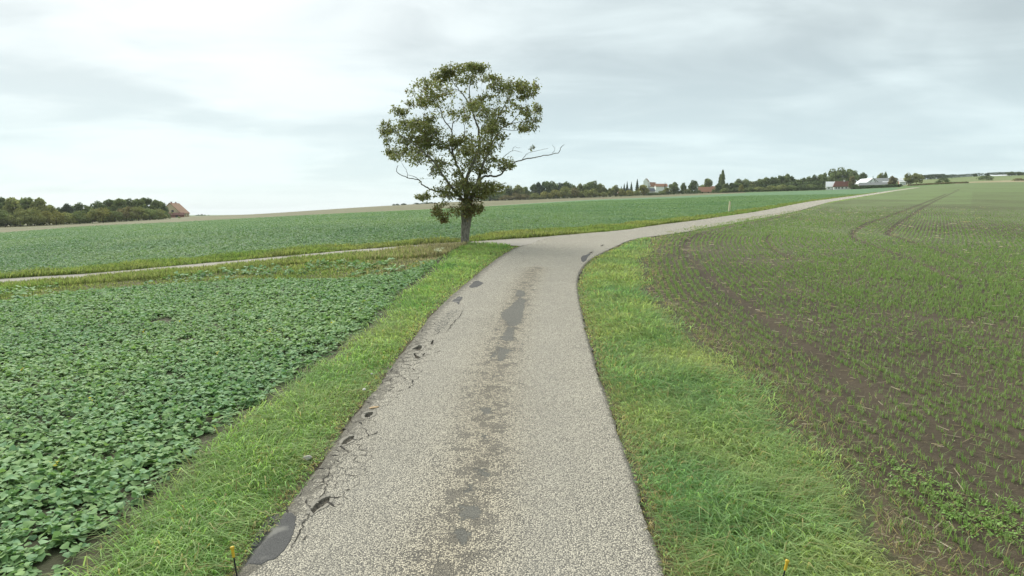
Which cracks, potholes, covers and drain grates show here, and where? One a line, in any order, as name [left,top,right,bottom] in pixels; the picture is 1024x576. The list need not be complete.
pothole [306,493,334,516]
pothole [338,433,357,446]
crack [286,307,465,548]
